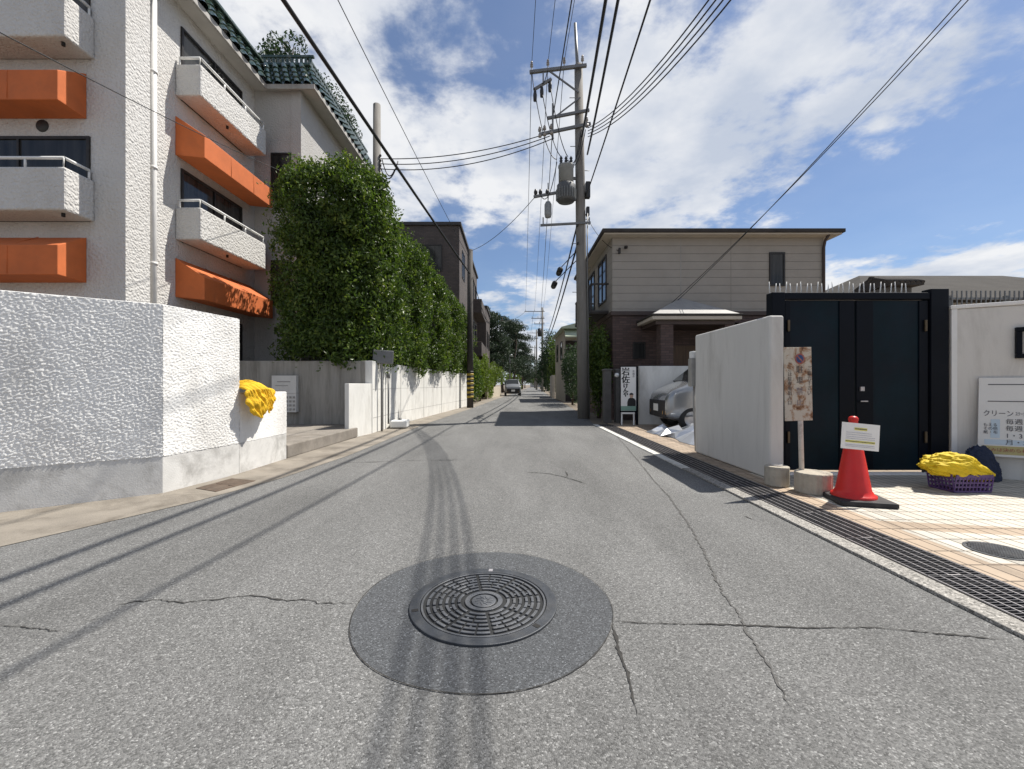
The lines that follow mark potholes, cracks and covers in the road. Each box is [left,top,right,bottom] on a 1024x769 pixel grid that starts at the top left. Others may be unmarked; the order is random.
crack [612,620,993,710]
drain grate [750,494,829,513]
drain grate [721,481,784,495]
drain grate [679,462,724,471]
manhole cover [962,541,1024,561]
drain grate [789,512,894,538]
drain grate [698,470,751,481]
drain grate [844,538,986,576]
crack [118,595,348,605]
manhole cover [409,568,557,647]
